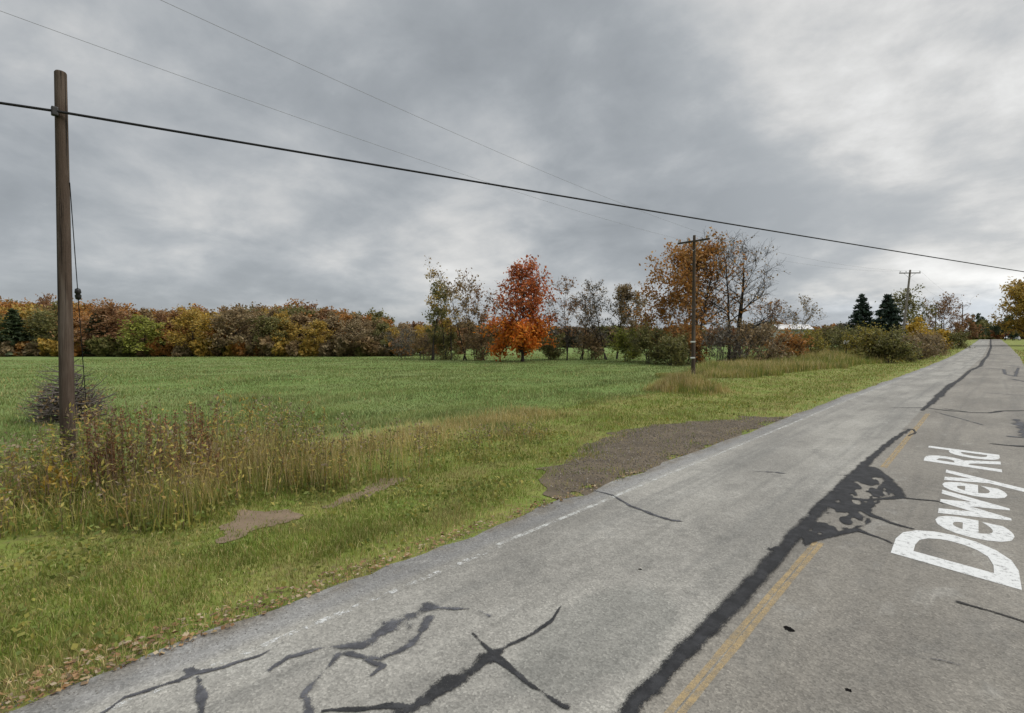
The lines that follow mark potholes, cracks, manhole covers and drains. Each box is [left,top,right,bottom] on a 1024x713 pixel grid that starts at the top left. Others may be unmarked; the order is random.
crack [912,354,1024,447]
crack [100,601,571,713]
